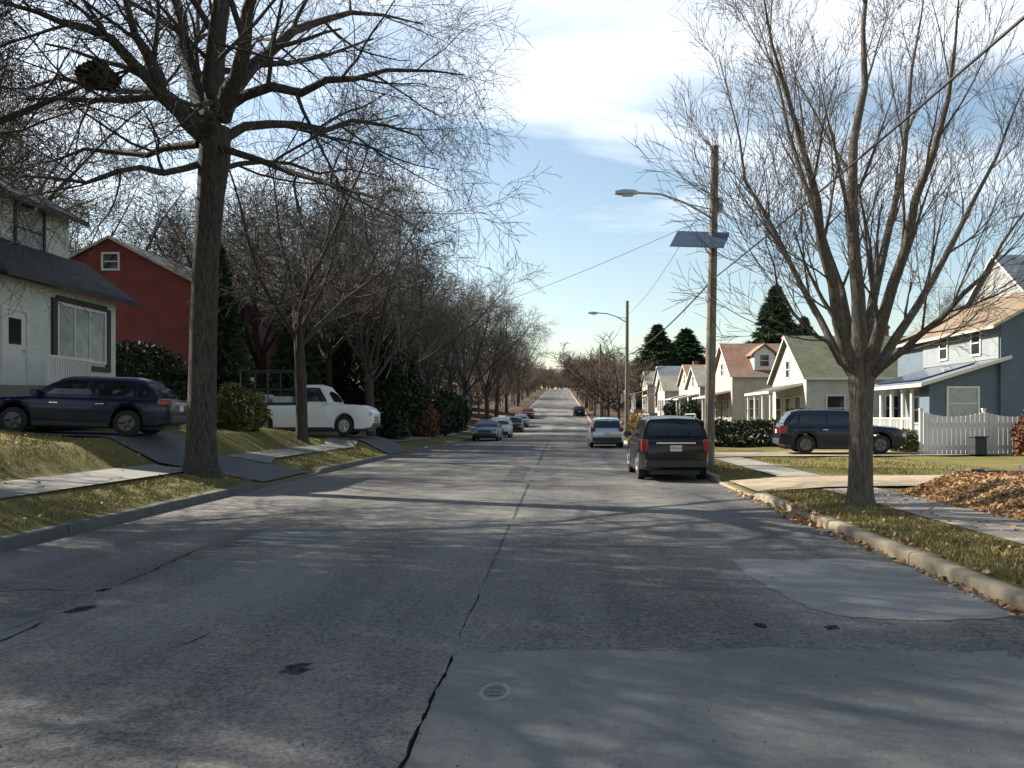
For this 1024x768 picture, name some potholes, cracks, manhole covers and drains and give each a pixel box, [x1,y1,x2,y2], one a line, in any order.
pothole [63,605,96,614]
crack [0,619,47,642]
pothole [278,663,313,675]
crack [114,545,270,587]
crack [397,592,480,768]
utility cover [479,683,511,701]
